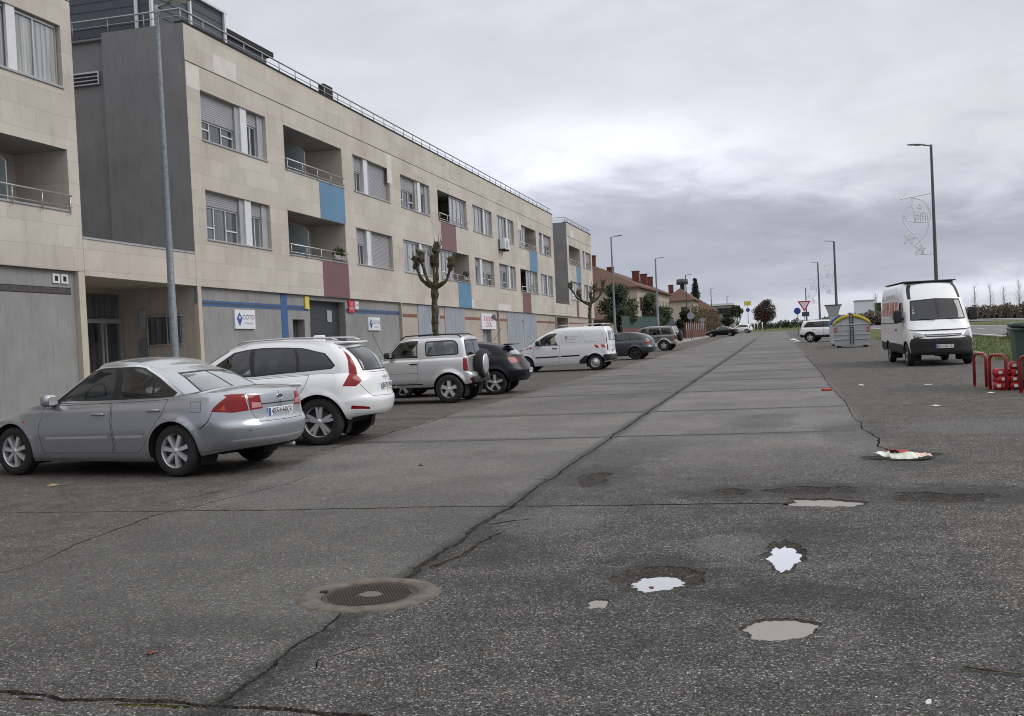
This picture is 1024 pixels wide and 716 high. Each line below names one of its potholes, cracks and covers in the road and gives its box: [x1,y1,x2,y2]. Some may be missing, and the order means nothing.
pothole [782,498,869,507]
crack [0,613,373,716]
pothole [608,565,706,593]
pothole [739,618,822,641]
pothole [758,539,808,574]
pothole [587,599,610,609]
manhole cover [296,578,442,613]
crack [0,339,894,578]
